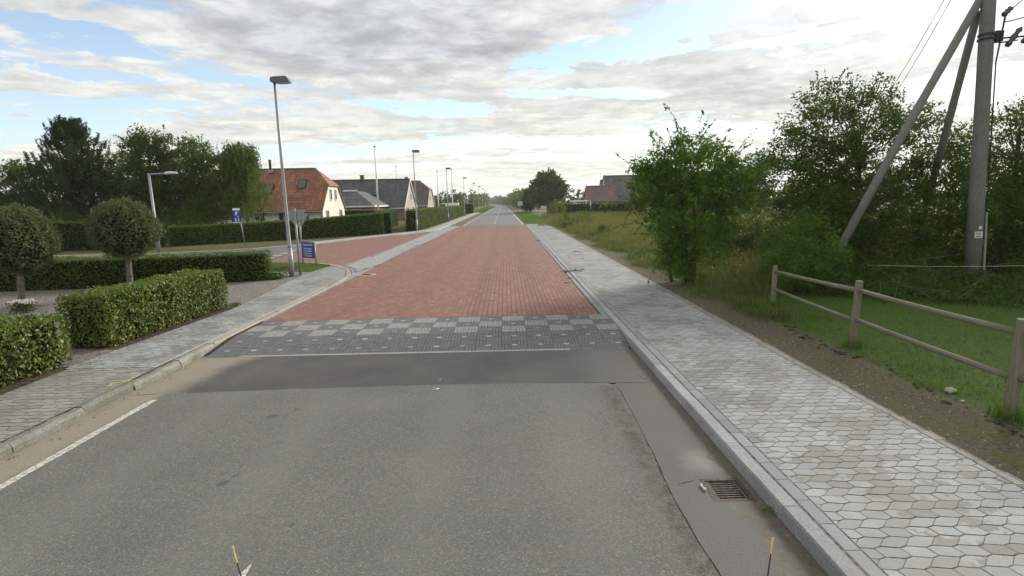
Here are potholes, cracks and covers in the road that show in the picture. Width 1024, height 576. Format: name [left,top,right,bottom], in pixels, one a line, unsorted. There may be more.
drain grate [699,478,755,501]
